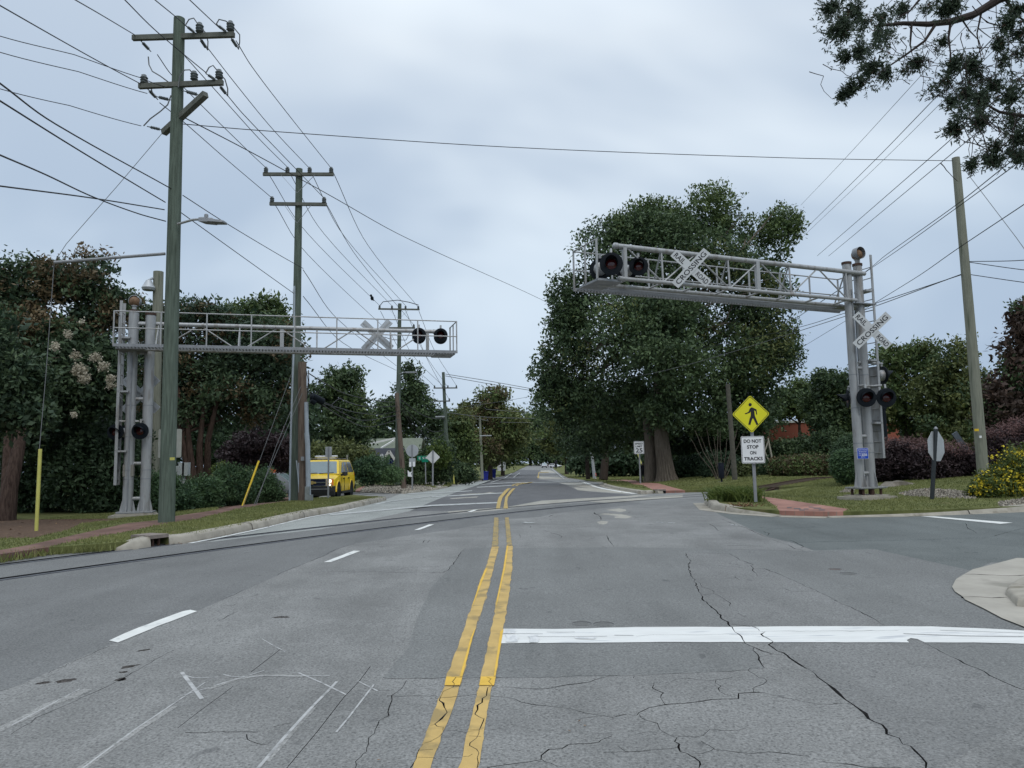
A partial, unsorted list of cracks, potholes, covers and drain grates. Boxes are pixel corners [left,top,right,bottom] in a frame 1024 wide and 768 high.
drain grate [131,533,169,547]
crack [355,554,927,768]
crack [712,524,1023,690]
